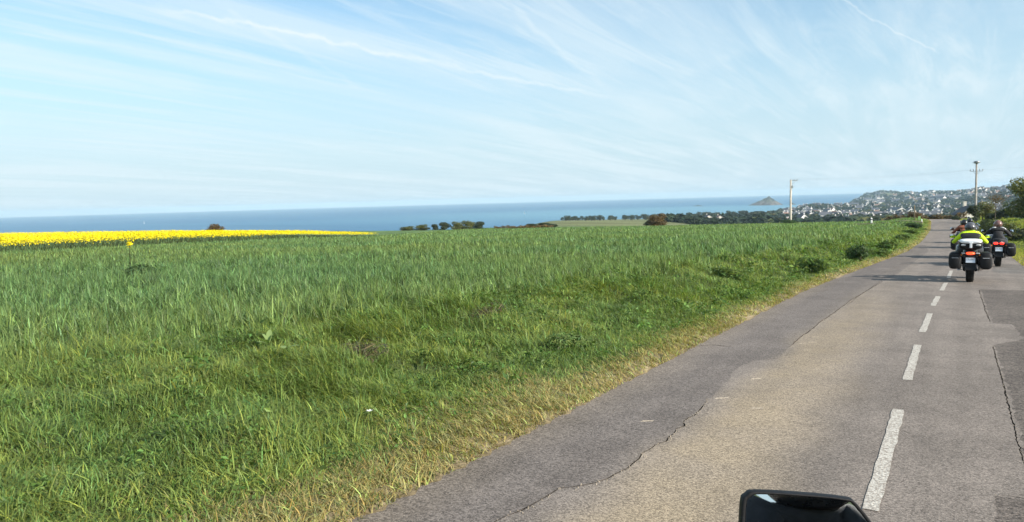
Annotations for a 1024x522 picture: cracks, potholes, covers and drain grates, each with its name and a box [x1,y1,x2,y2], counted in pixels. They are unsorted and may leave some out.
crack [992,345,1024,464]
